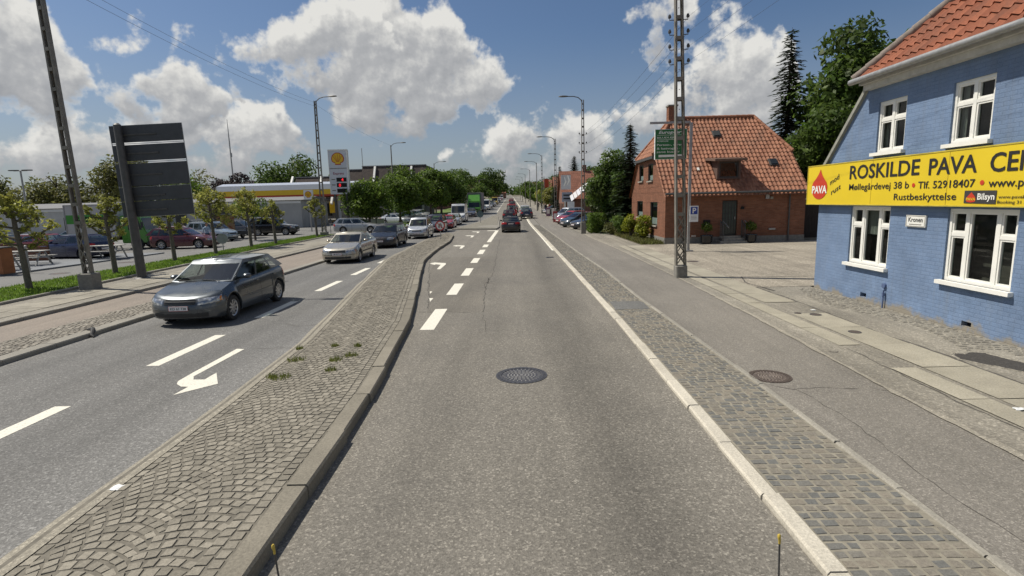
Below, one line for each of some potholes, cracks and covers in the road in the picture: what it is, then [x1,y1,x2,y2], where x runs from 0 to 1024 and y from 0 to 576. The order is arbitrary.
manhole cover [496,367,547,384]
crack [482,240,500,330]
manhole cover [749,370,792,383]
